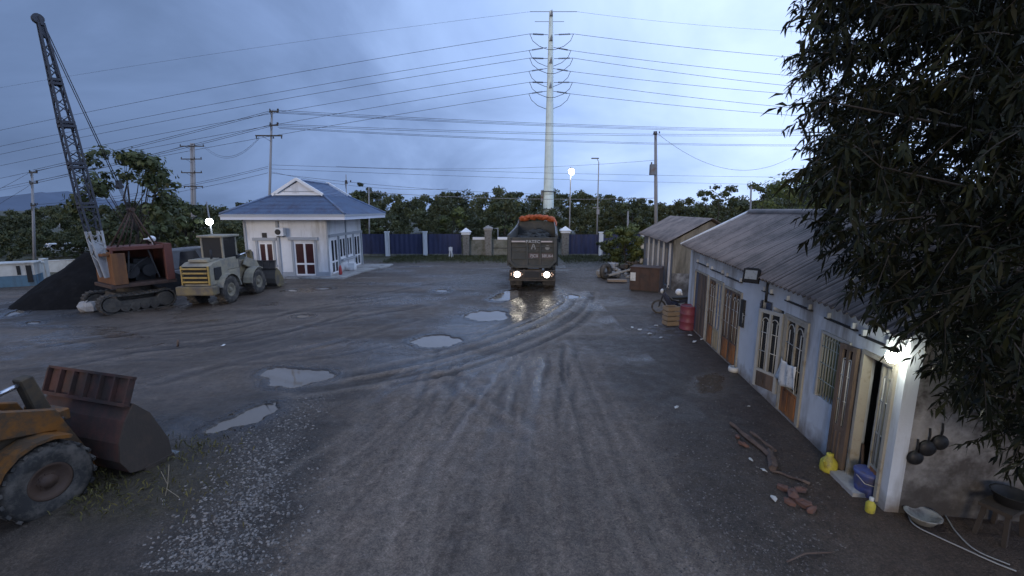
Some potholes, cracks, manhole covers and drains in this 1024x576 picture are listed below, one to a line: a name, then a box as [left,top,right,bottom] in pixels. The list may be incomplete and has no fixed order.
pothole [191,398,290,438]
pothole [458,309,515,323]
pothole [403,333,469,350]
pothole [485,289,524,302]
pothole [249,364,344,391]
